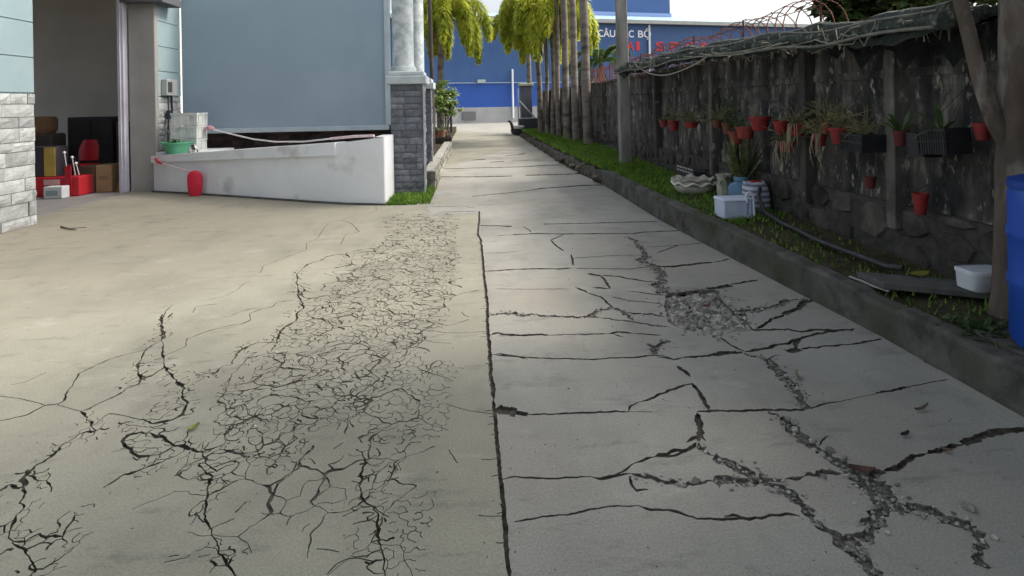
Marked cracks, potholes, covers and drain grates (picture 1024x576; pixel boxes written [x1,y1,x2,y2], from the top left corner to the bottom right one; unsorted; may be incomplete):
crack [0,213,1024,576]
pothole [647,287,759,342]
